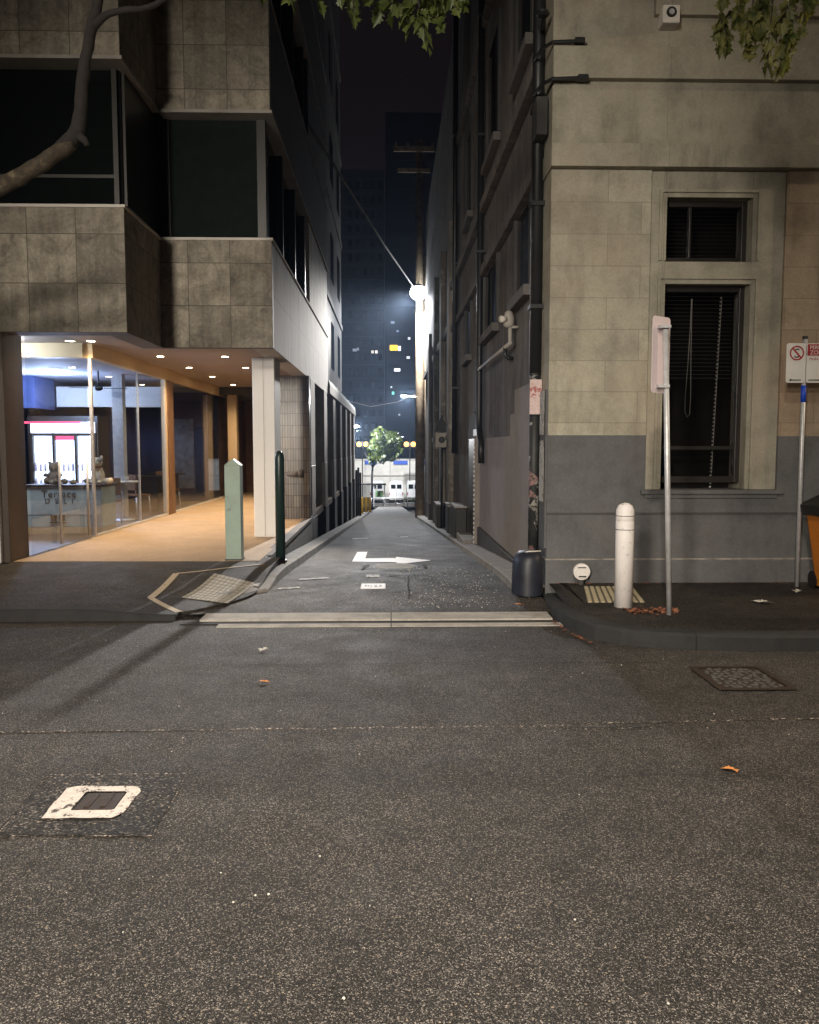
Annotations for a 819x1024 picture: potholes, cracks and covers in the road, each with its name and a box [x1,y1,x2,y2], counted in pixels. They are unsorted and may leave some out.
crack [385,564,427,596]
manhole cover [42,786,141,818]
manhole cover [688,665,800,690]
